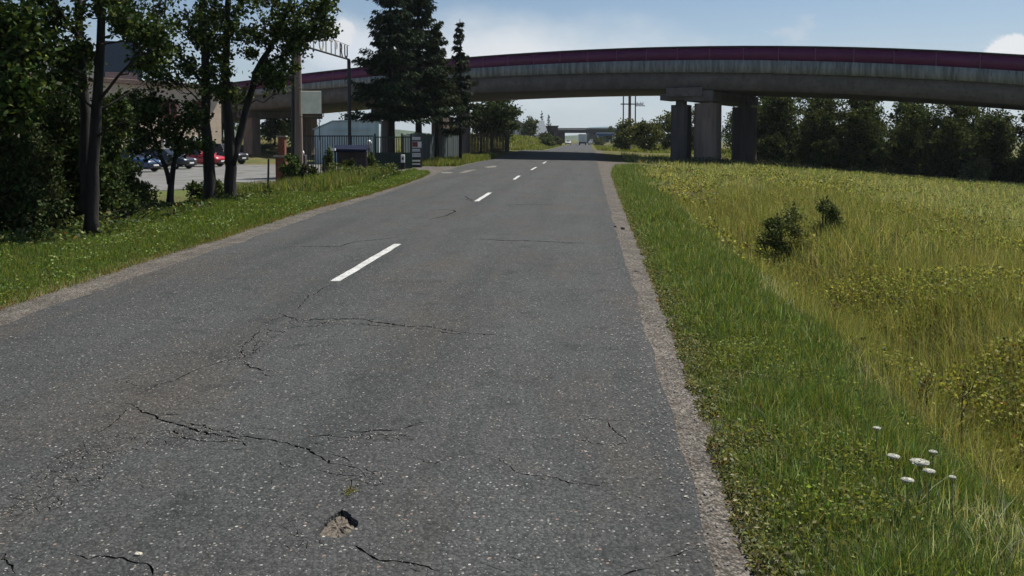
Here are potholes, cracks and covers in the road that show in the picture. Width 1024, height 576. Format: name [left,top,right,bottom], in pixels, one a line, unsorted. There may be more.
crack [498,457,602,487]
crack [581,418,628,446]
crack [1,283,507,522]
crack [0,553,14,572]
crack [350,546,437,574]
pothole [319,510,359,538]
crack [77,555,154,575]
